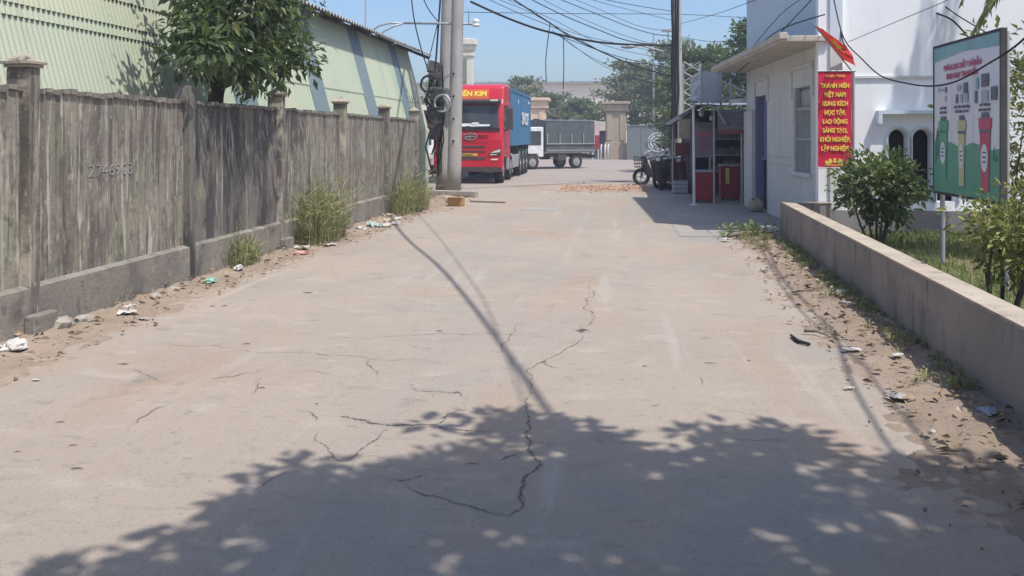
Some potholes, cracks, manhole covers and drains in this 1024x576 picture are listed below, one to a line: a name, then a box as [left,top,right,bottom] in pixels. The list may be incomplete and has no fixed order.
crack [300,385,484,461]
crack [384,276,595,516]
